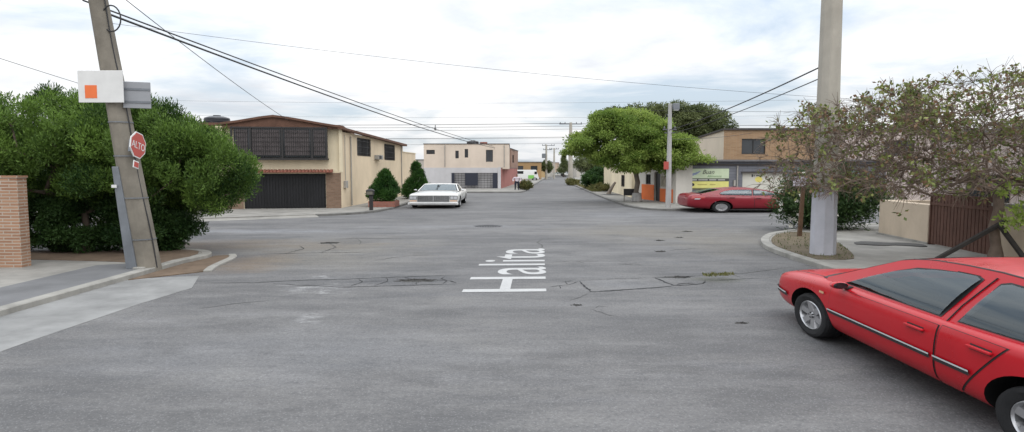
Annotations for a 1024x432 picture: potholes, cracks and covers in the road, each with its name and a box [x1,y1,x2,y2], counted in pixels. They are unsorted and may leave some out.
crack [537,238,706,316]
crack [281,238,379,254]
